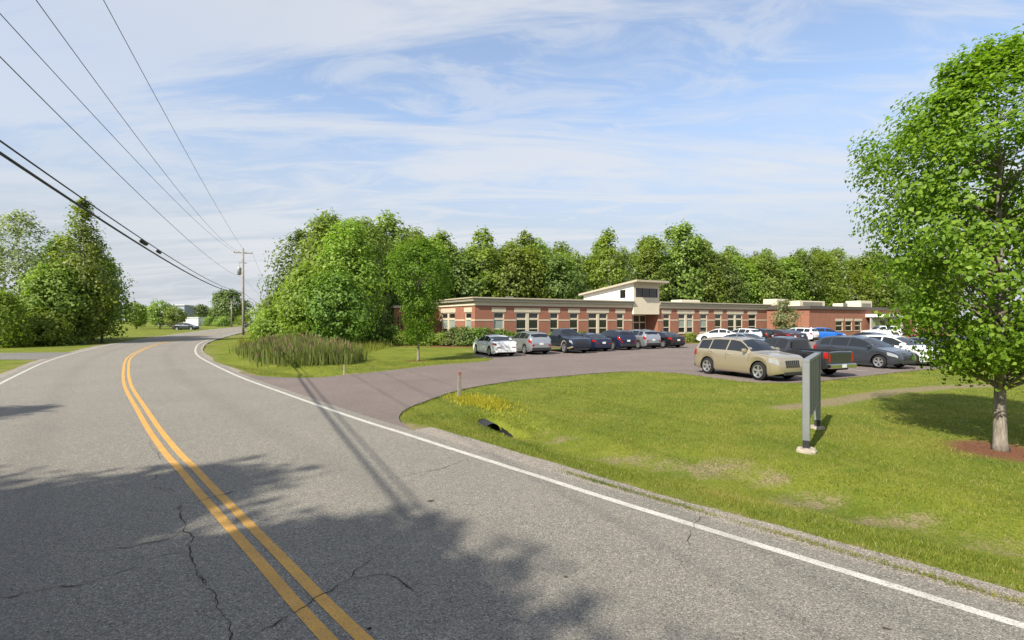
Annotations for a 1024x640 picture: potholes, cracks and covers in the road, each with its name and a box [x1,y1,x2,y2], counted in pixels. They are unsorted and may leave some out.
crack [254,560,461,636]
crack [4,445,233,640]
